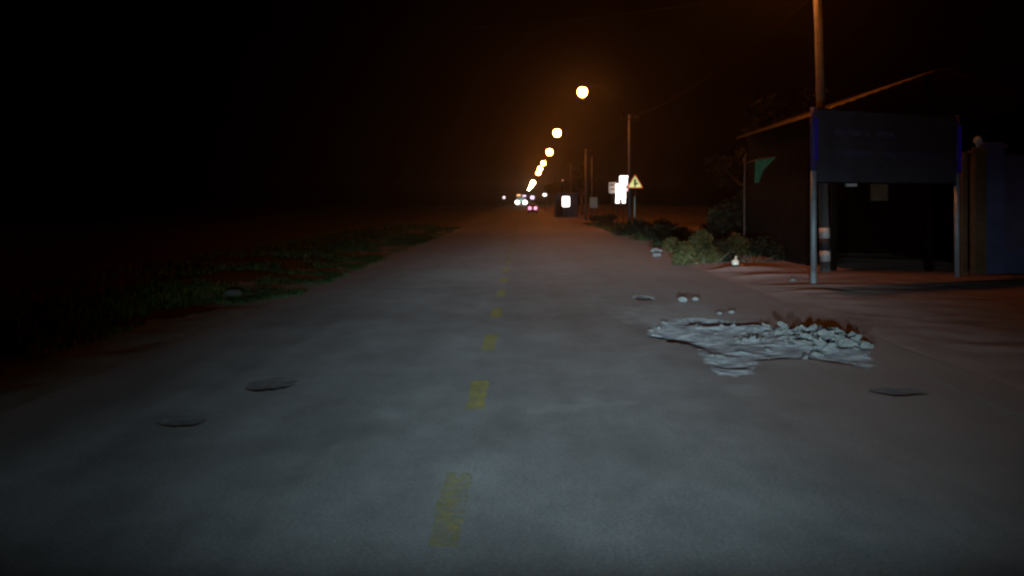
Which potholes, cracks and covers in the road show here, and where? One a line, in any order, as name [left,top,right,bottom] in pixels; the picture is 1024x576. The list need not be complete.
pothole [245,377,298,392]
pothole [868,388,928,397]
pothole [640,318,881,379]
pothole [156,415,207,427]
